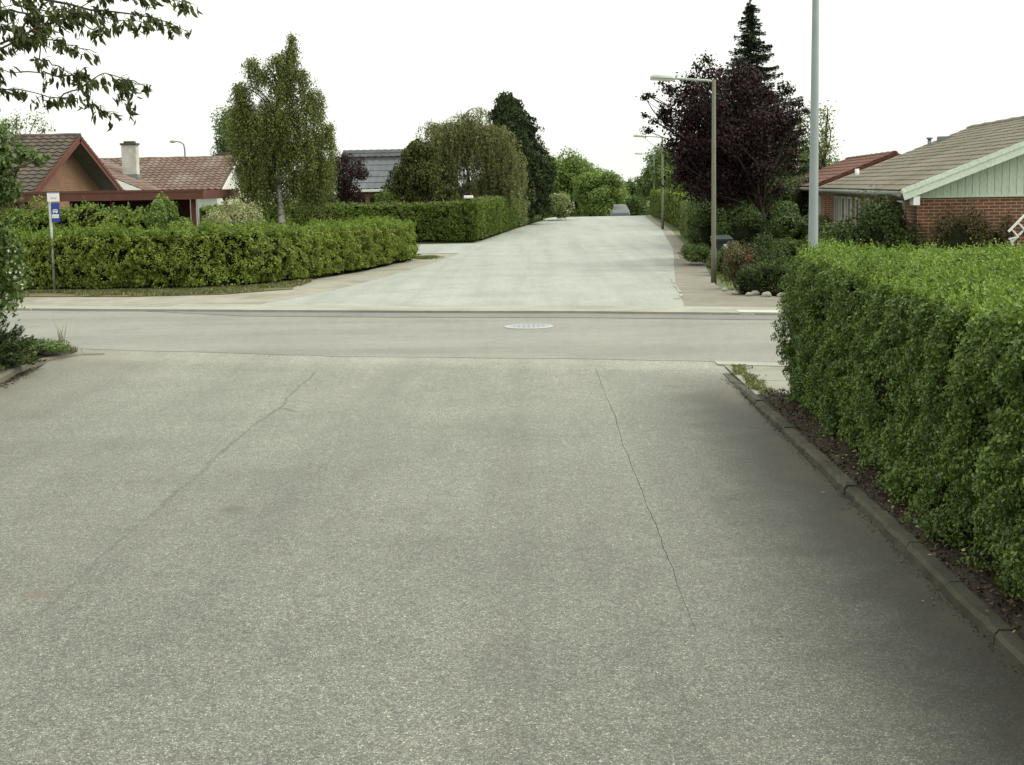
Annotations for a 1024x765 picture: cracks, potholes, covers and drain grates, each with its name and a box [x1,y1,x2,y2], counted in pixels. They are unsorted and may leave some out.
crack [595,368,700,642]
crack [0,371,316,643]
